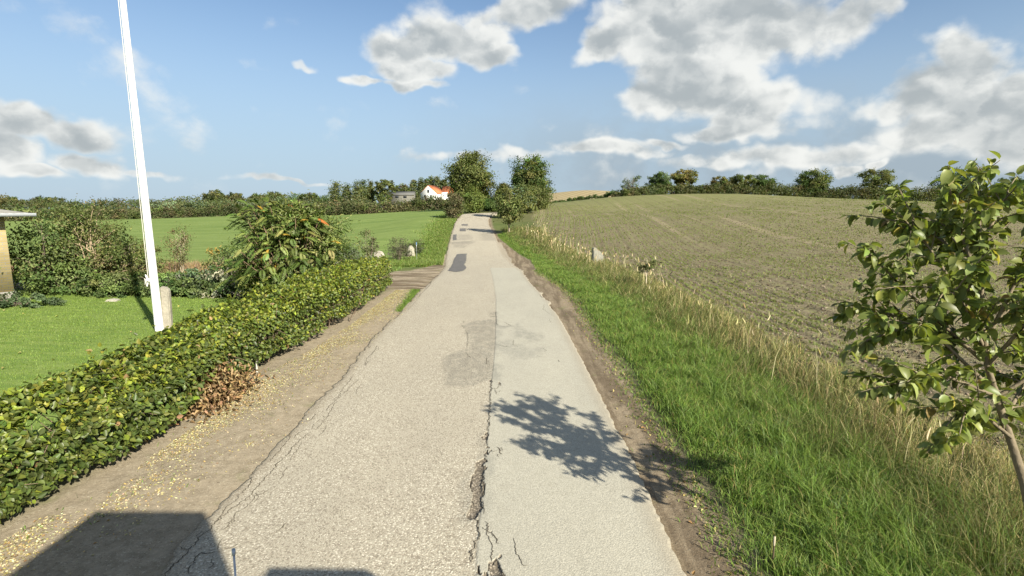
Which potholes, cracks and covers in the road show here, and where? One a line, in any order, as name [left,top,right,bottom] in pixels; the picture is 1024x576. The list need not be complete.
crack [462,313,559,457]
crack [164,346,379,576]
pothole [467,459,486,520]
